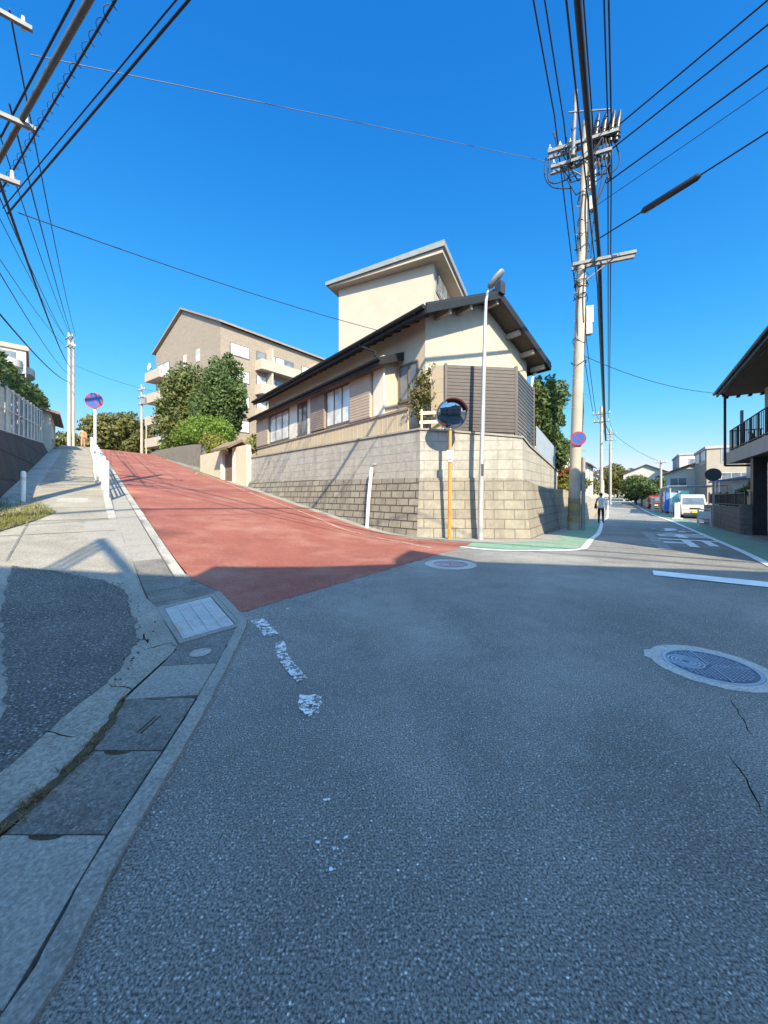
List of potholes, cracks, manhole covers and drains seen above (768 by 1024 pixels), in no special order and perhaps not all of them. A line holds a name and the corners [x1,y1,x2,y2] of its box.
manhole cover [643,645,768,693]
crack [730,757,761,812]
manhole cover [425,559,477,570]
